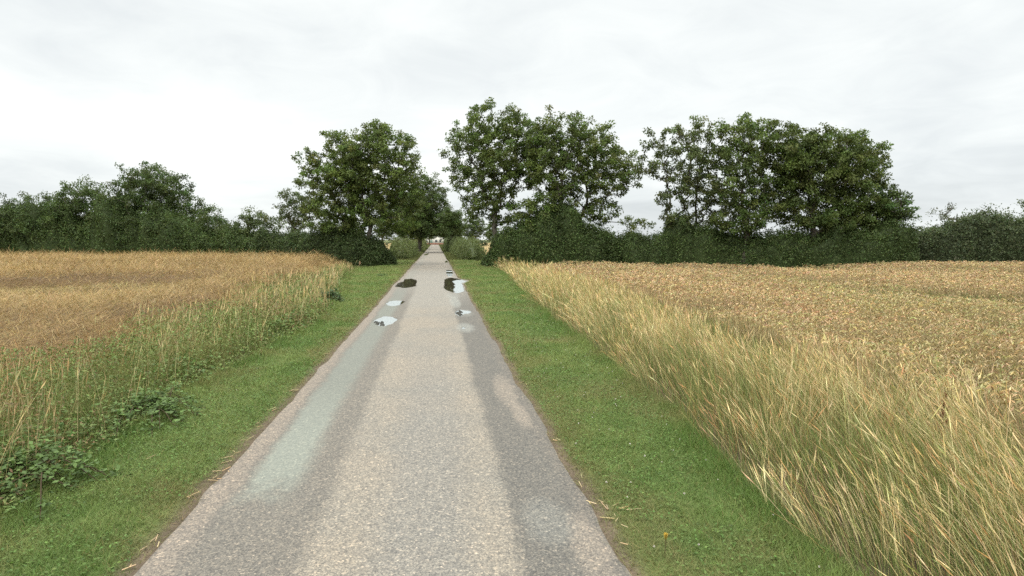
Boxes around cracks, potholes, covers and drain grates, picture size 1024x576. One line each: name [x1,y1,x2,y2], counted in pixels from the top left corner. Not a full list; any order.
pothole [443,278,468,293]
pothole [395,278,417,288]
pothole [374,316,398,326]
